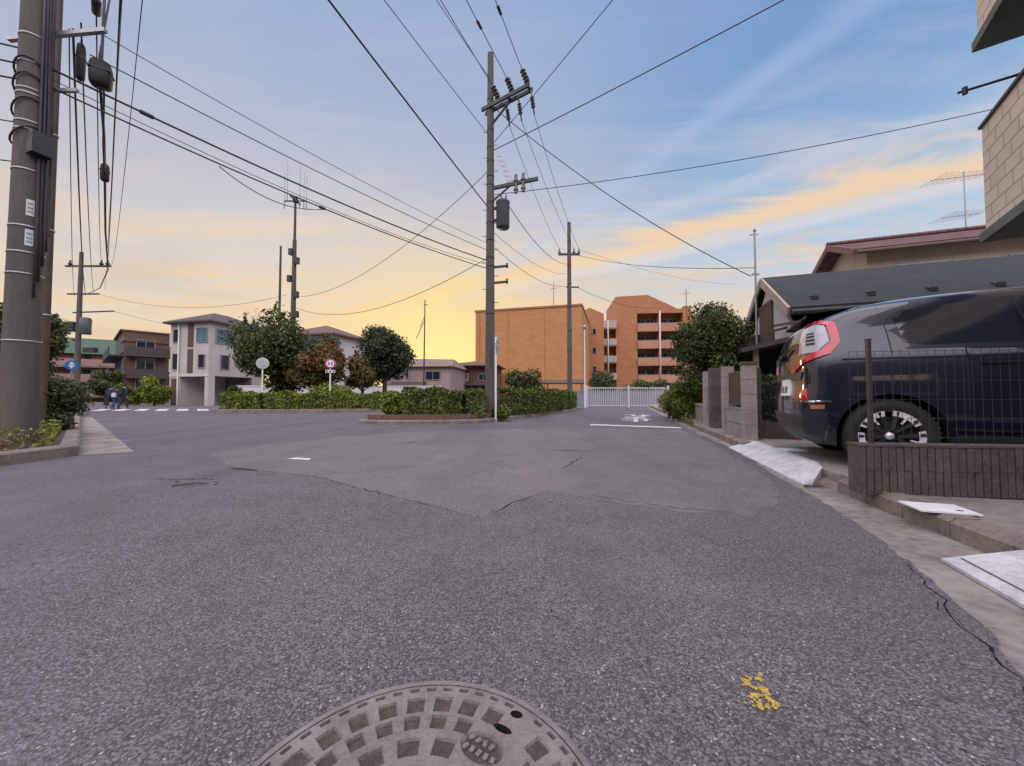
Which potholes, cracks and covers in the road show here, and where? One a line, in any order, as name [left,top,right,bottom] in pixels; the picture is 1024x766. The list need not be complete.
crack [900,559,1024,693]
crack [564,491,737,513]
manhole cover [252,681,591,766]
crack [267,471,470,516]
